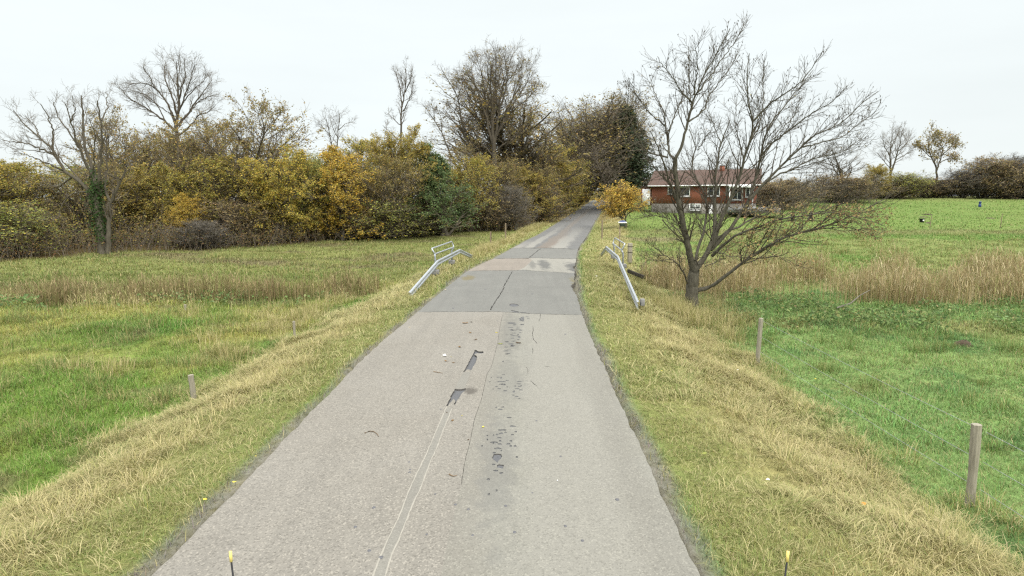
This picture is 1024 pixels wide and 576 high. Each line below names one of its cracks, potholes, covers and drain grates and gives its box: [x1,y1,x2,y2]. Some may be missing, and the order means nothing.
crack [461,272,548,495]
pothole [463,350,484,372]
pothole [446,388,466,406]
